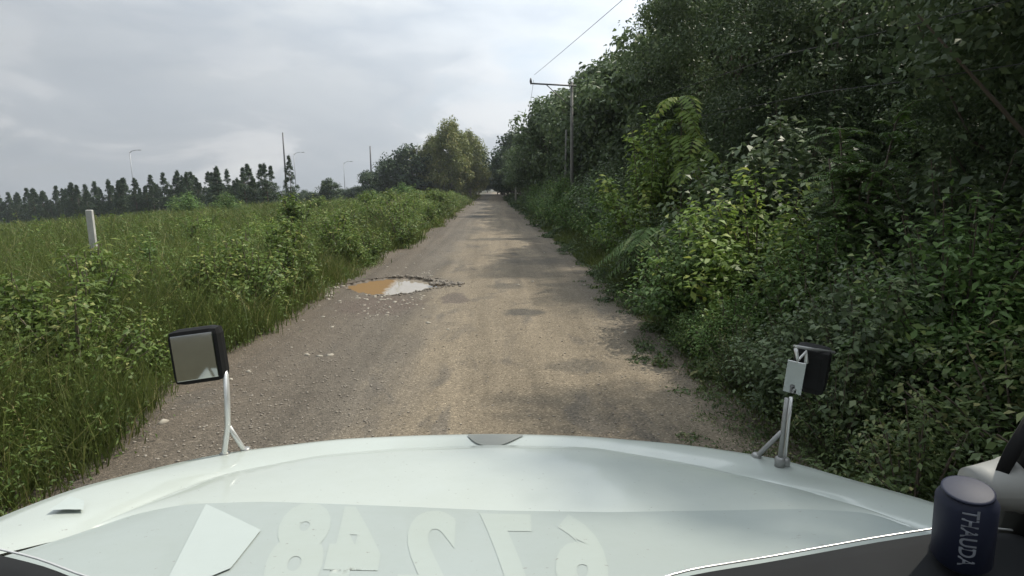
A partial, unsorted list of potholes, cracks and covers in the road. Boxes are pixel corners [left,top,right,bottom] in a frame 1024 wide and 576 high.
pothole [340,274,465,296]
